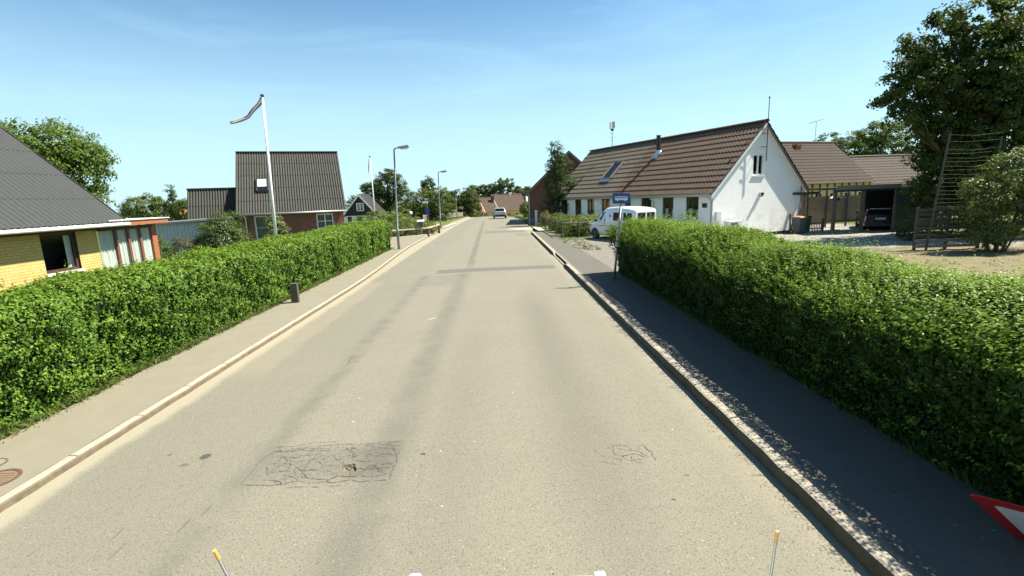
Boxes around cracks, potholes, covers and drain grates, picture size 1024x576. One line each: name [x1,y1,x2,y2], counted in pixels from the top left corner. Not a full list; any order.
crack [246,441,401,487]
manhole cover [0,468,23,486]
crack [595,445,656,464]
